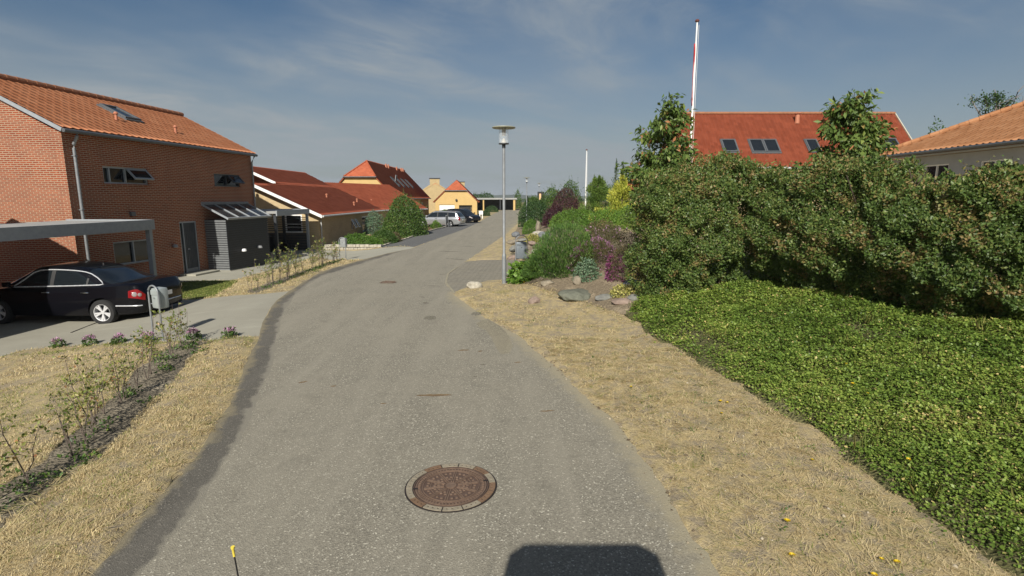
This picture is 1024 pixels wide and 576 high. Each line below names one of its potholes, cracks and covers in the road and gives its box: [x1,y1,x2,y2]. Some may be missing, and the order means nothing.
manhole cover [404,463,497,513]
